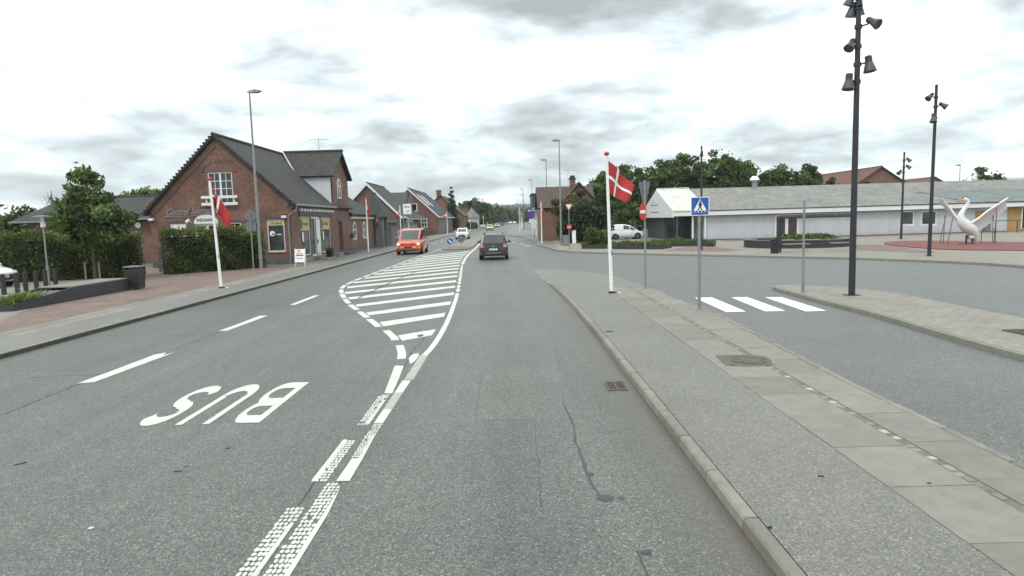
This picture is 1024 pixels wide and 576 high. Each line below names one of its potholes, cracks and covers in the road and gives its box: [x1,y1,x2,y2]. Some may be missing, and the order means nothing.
crack [636,550,652,576]
manhole cover [715,354,771,366]
drain grate [604,381,628,391]
